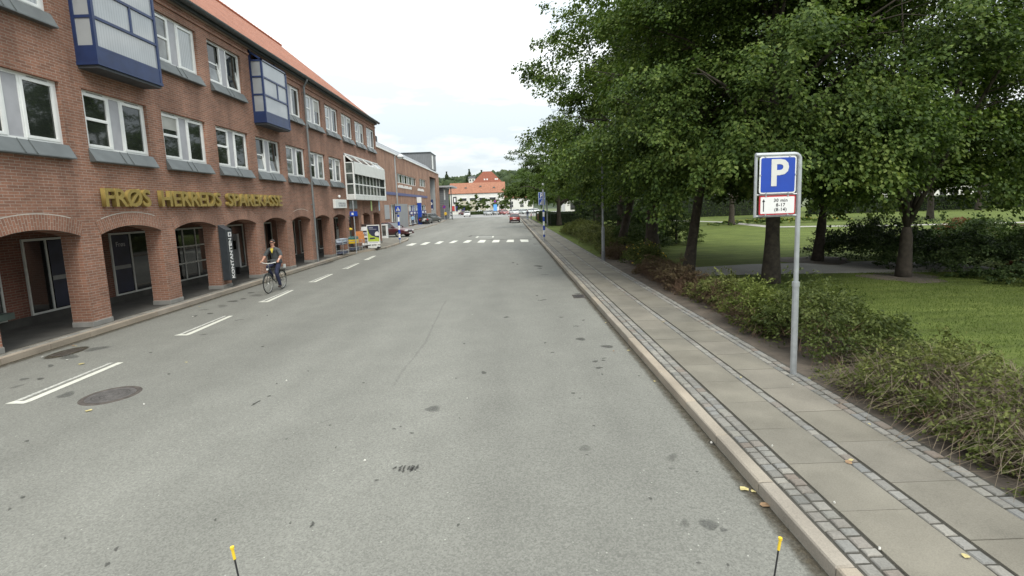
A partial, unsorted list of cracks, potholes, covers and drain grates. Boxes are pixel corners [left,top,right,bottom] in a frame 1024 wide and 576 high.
manhole cover [77,386,143,406]
